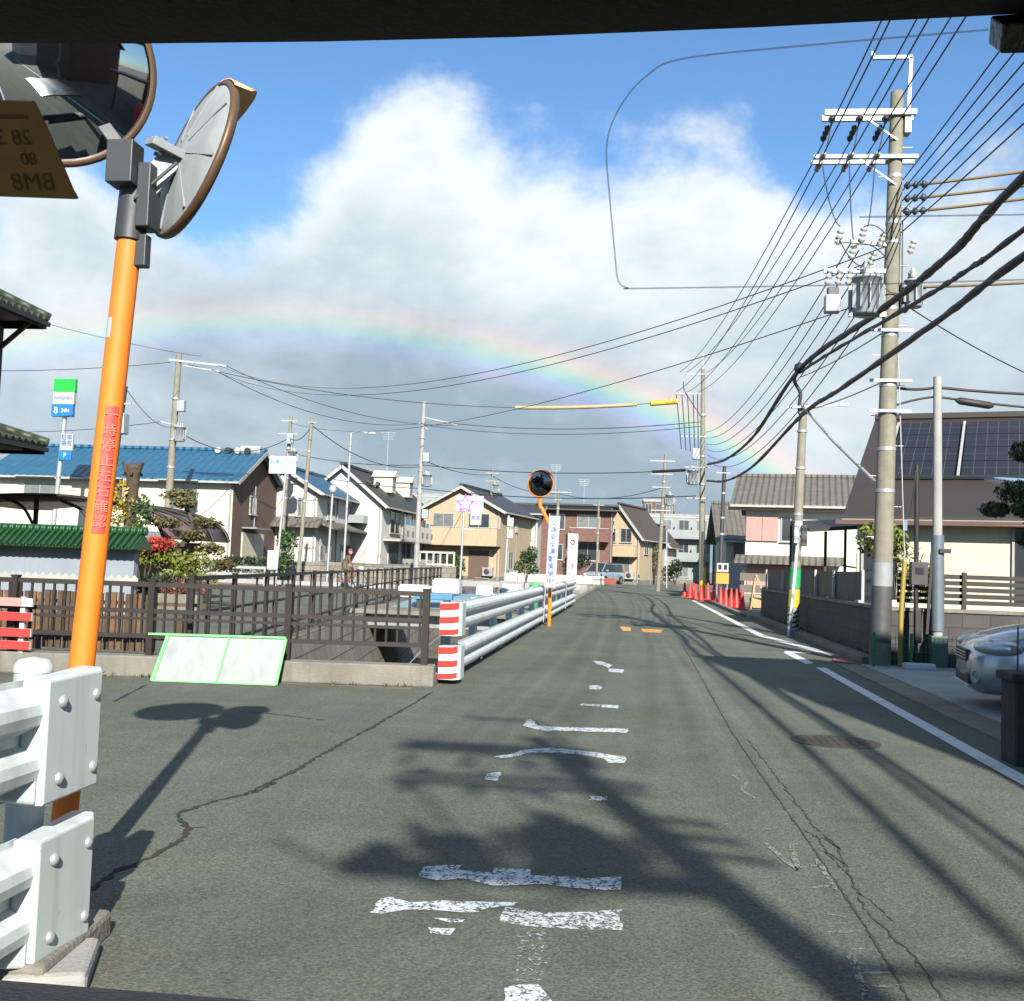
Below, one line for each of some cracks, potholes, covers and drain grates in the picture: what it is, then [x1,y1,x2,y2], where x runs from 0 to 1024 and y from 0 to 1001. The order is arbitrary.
crack [90,692,432,891]
manhole cover [790,734,882,749]
